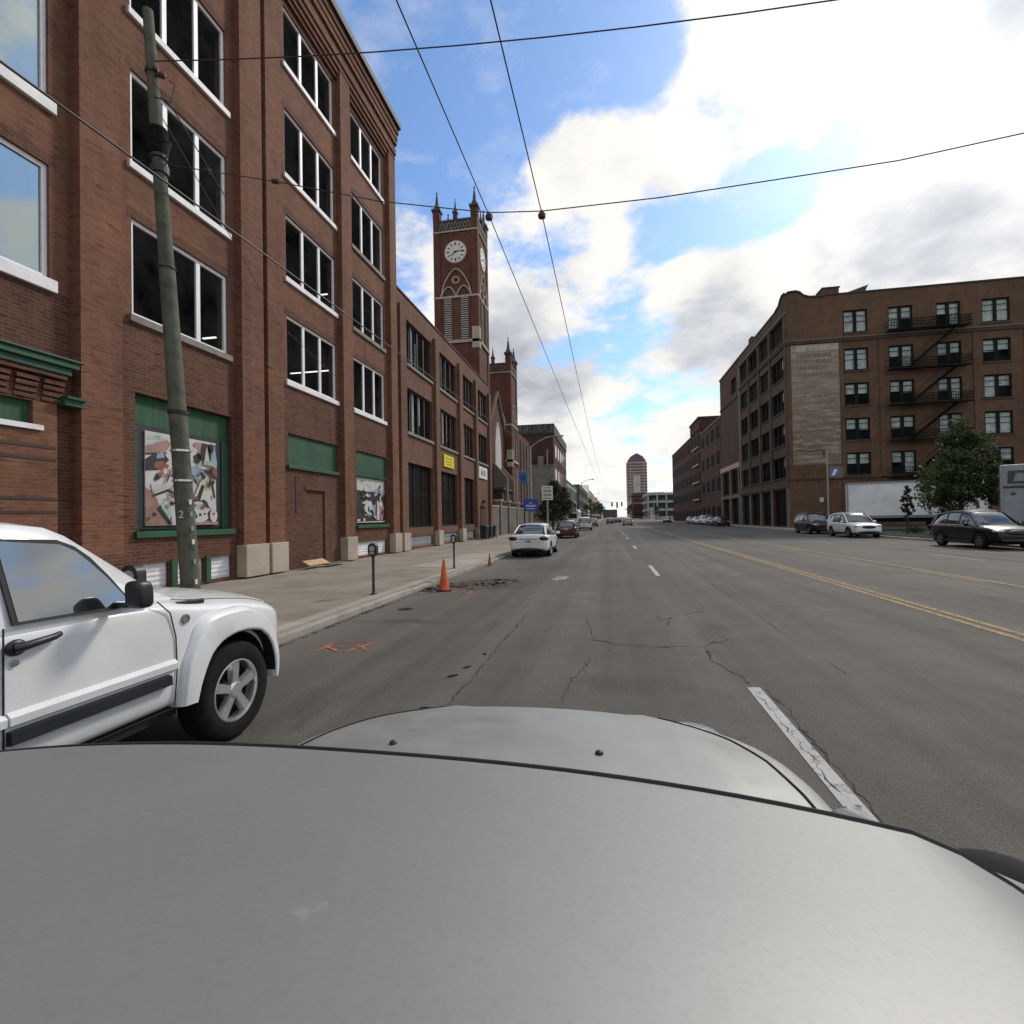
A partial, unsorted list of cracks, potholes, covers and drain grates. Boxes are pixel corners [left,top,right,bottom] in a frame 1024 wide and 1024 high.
crack [562,620,882,821]
pothole [419,578,519,592]
crack [446,614,527,707]
